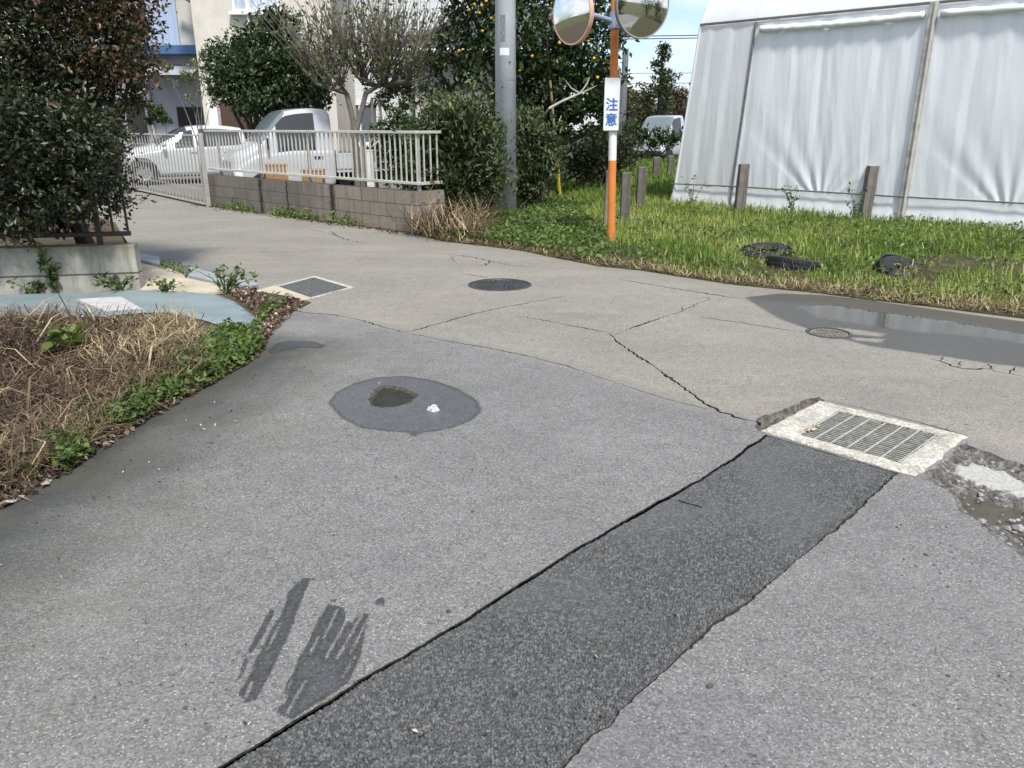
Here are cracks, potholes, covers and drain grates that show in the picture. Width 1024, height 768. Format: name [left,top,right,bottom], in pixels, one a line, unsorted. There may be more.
crack [932,356,1024,377]
pothole [923,442,1024,558]
manhole cover [805,327,853,339]
crack [452,255,525,277]
pothole [368,385,418,408]
manhole cover [468,278,532,291]
crack [217,295,898,768]
